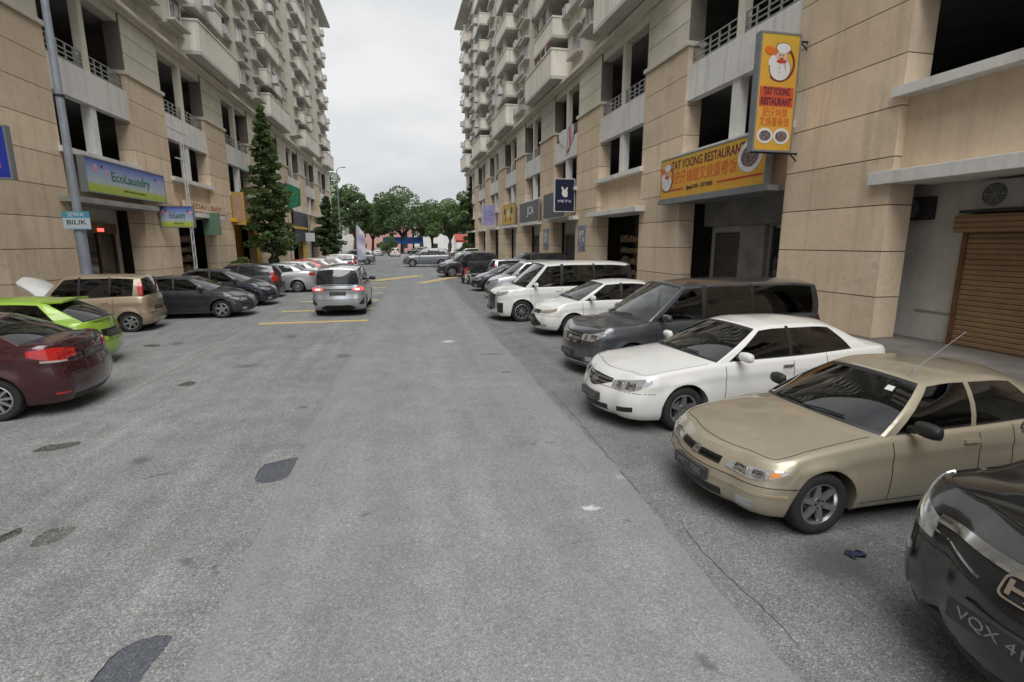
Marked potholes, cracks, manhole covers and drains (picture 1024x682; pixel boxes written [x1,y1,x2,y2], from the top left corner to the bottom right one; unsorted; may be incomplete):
crack [682,523,791,637]
